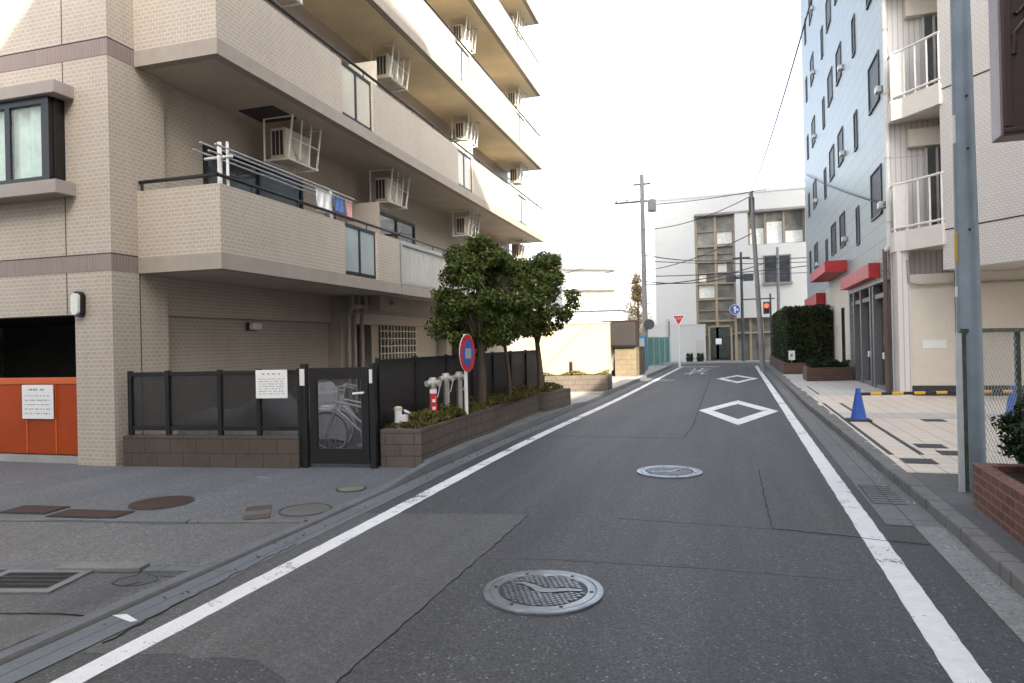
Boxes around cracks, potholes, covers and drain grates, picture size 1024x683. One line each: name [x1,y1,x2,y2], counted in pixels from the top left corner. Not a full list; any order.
drain grate [858,484,907,505]
manhole cover [128,495,195,510]
manhole cover [637,465,703,479]
utility cover [243,505,272,520]
drain grate [0,569,93,594]
manhole cover [278,503,332,517]
manhole cover [483,570,604,616]
